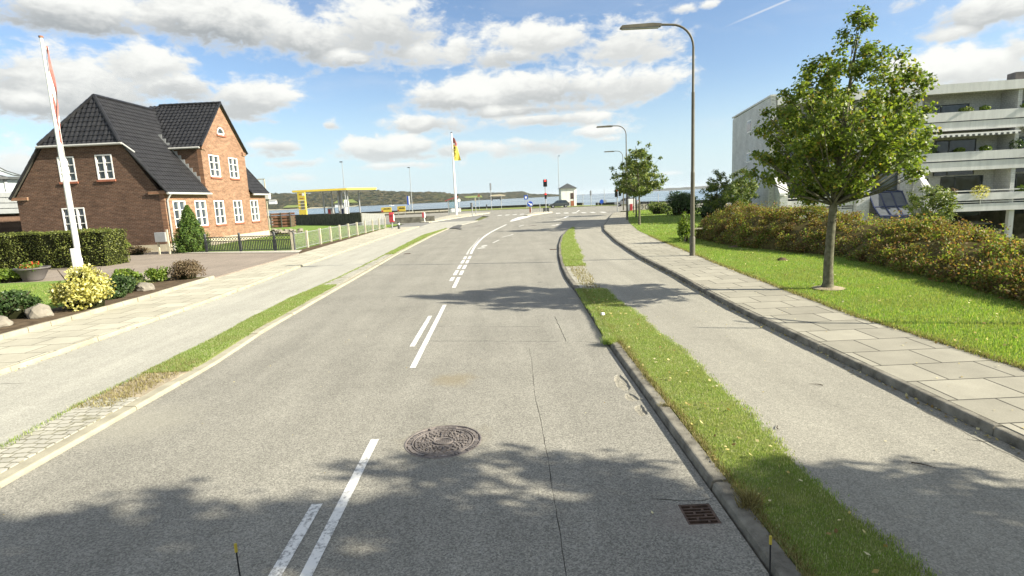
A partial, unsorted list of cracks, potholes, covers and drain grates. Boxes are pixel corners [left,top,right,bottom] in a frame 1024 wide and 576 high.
drain grate [678,503,721,525]
crack [529,349,567,576]
manhole cover [404,425,482,459]
